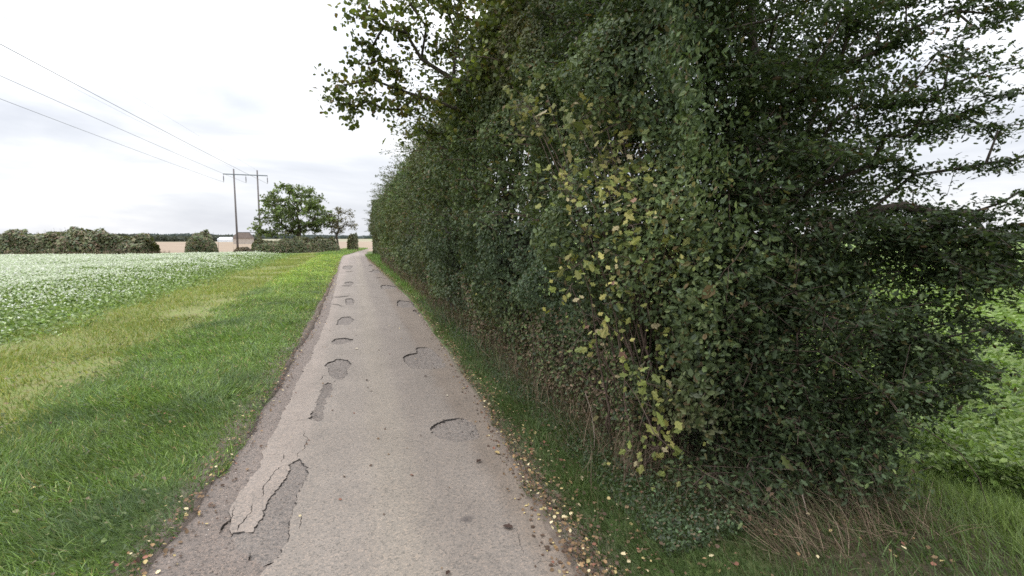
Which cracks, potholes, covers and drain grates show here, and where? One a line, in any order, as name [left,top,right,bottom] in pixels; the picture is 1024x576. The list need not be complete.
pothole [309,383,334,422]
pothole [336,317,354,325]
crack [219,420,309,533]
pothole [430,418,480,442]
pothole [231,459,309,567]
pothole [403,347,445,369]
pothole [324,359,351,380]
